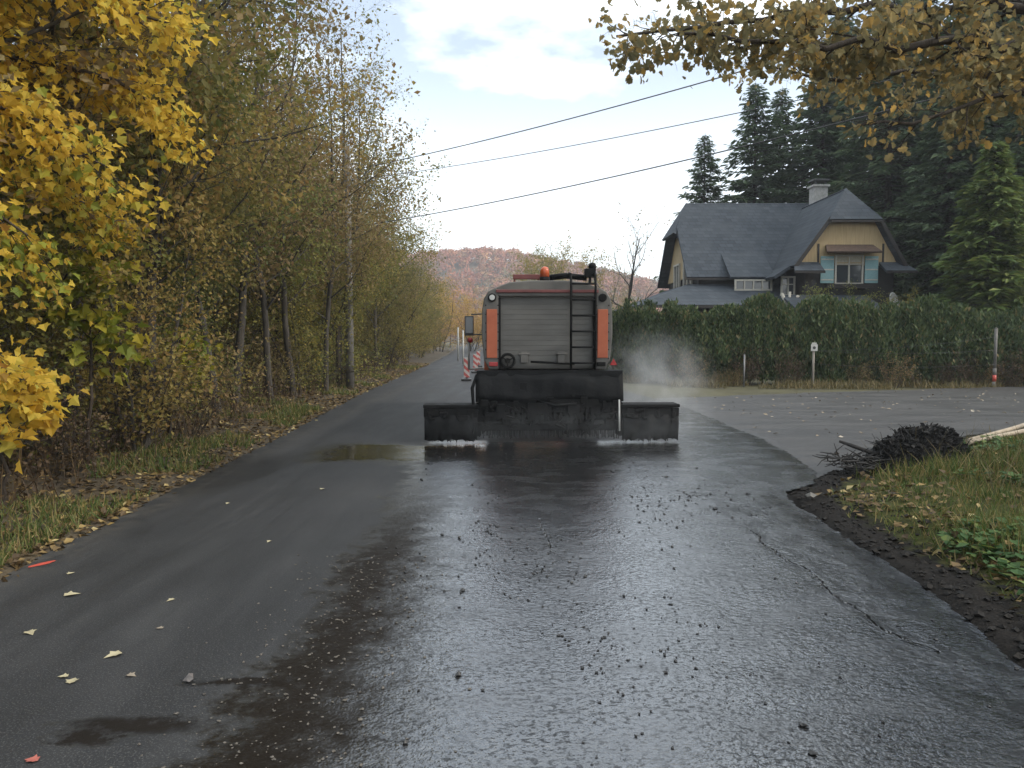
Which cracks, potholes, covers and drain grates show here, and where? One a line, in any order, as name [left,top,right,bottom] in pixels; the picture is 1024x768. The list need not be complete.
crack [748,530,940,652]
